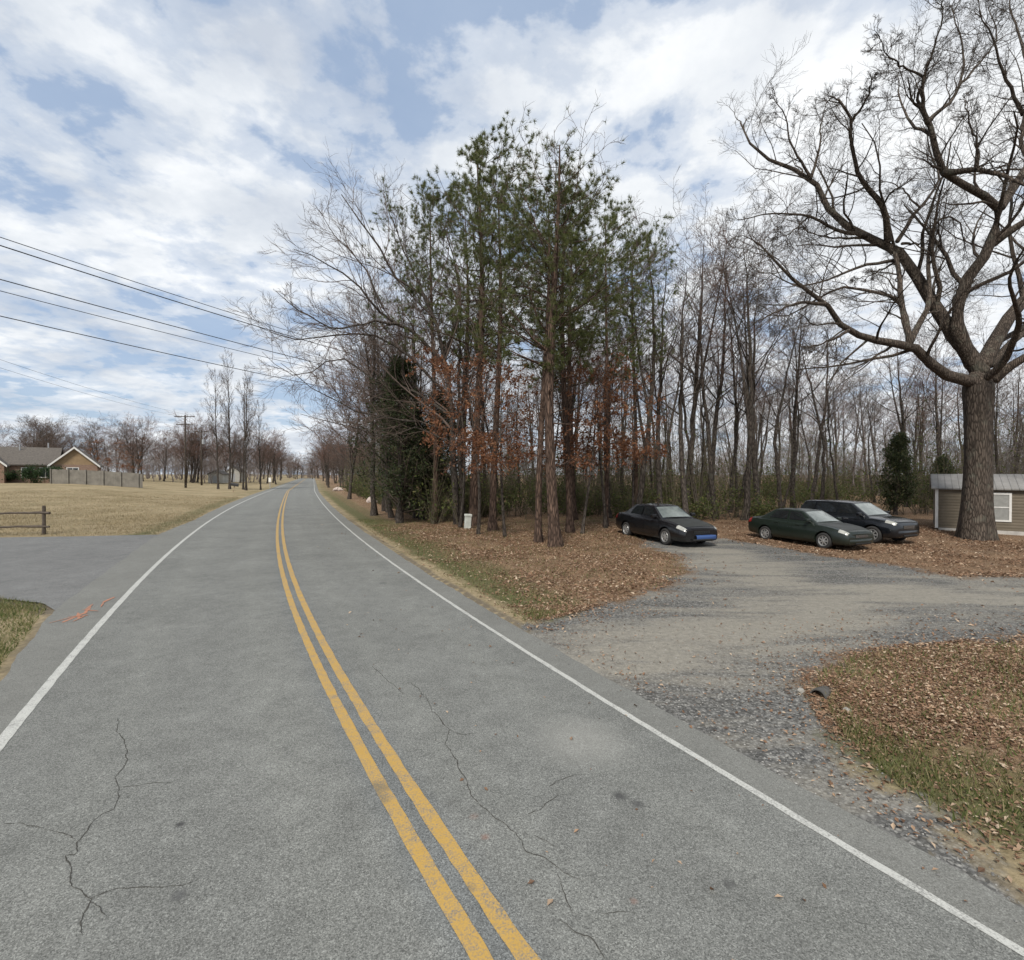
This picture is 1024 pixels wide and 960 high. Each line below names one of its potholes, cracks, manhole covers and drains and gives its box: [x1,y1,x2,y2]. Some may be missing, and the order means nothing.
crack [4,719,193,936]
crack [372,666,604,957]
